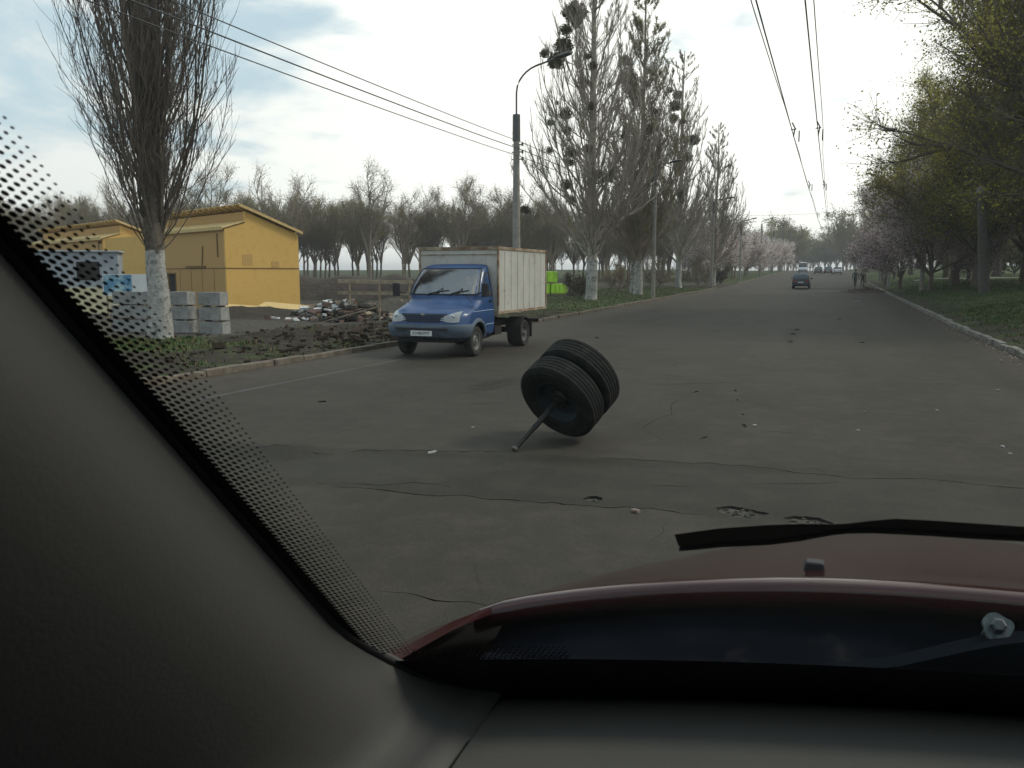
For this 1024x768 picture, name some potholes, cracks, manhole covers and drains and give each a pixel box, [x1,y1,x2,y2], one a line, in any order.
crack [383,591,484,605]
crack [288,430,509,459]
crack [322,482,703,540]
pothole [716,506,769,518]
pothole [784,516,834,524]
